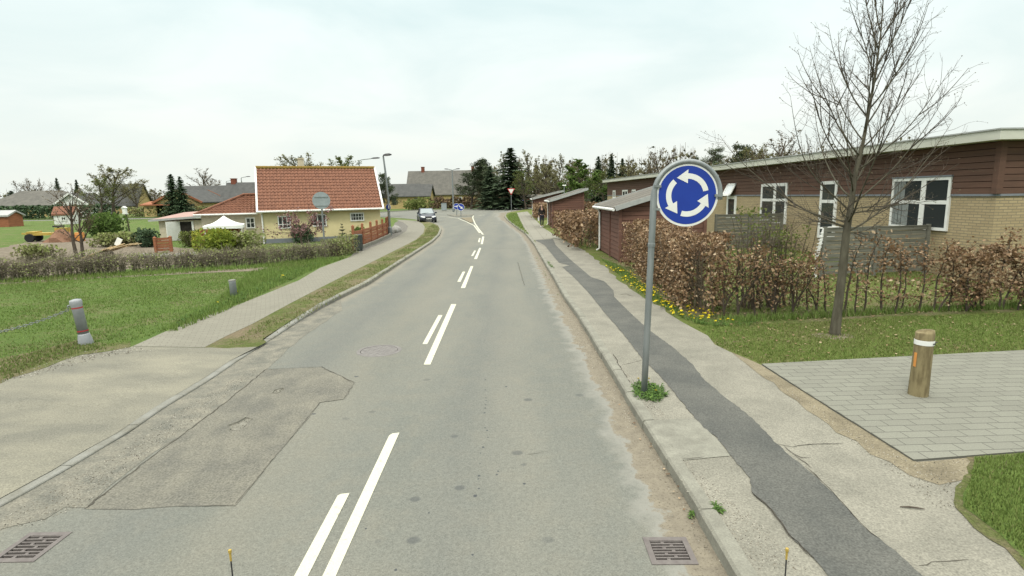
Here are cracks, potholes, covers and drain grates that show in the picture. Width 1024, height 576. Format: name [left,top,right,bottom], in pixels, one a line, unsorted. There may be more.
manhole cover [356,345,402,357]
drain grate [642,537,699,565]
pothole [228,417,252,430]
drain grate [0,532,72,563]
